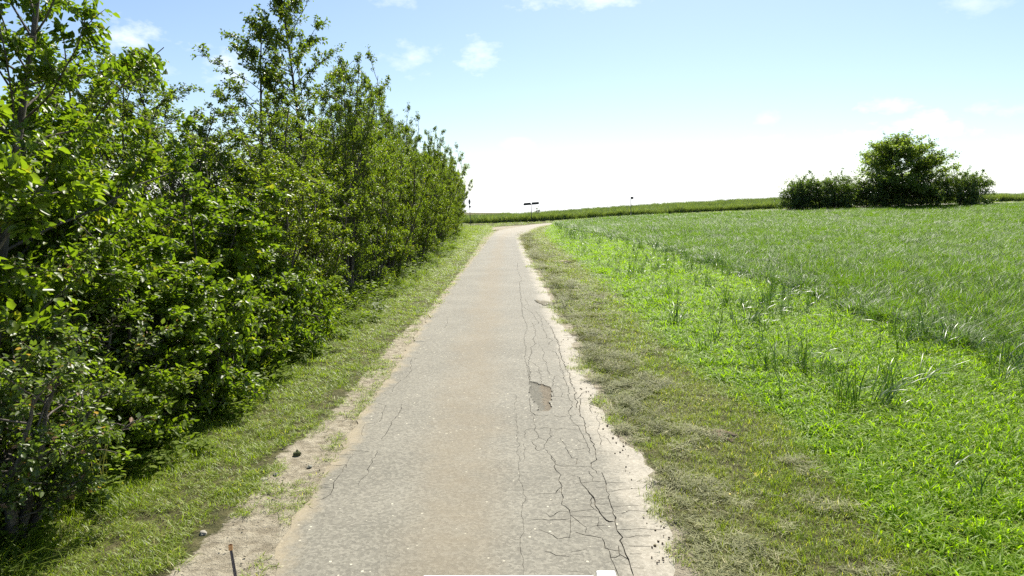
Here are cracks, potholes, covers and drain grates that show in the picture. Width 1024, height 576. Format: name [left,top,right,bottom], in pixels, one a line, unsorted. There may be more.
crack [517,266,655,576]
crack [323,359,412,499]
pothole [528,381,553,411]
